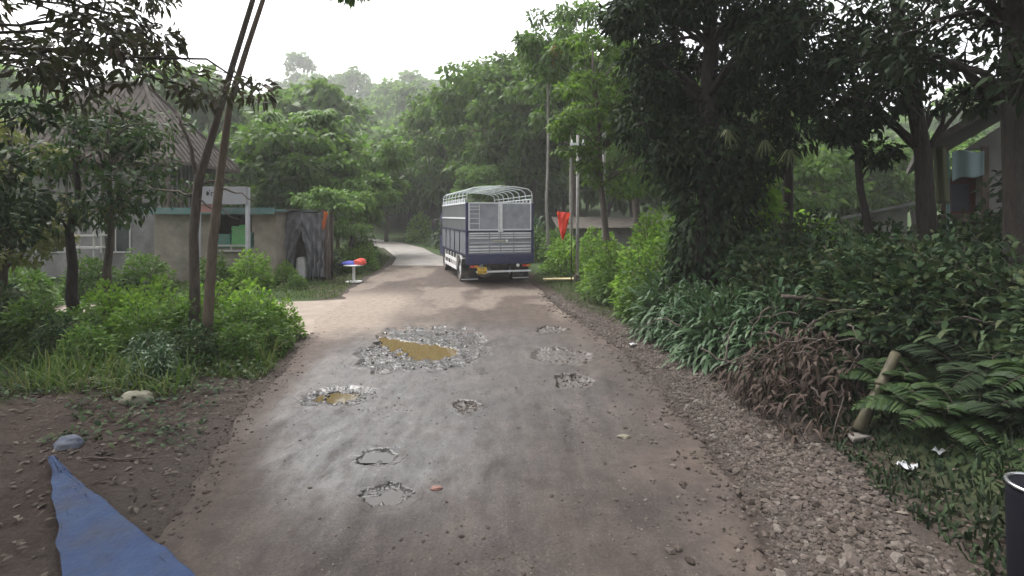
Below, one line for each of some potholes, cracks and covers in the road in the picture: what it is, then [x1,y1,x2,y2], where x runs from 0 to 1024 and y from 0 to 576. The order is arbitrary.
pothole [291,383,383,408]
pothole [346,444,408,471]
pothole [446,397,488,417]
pothole [348,477,424,513]
pothole [548,371,600,391]
pothole [347,323,496,376]
pothole [532,324,570,334]
pothole [525,345,601,367]
